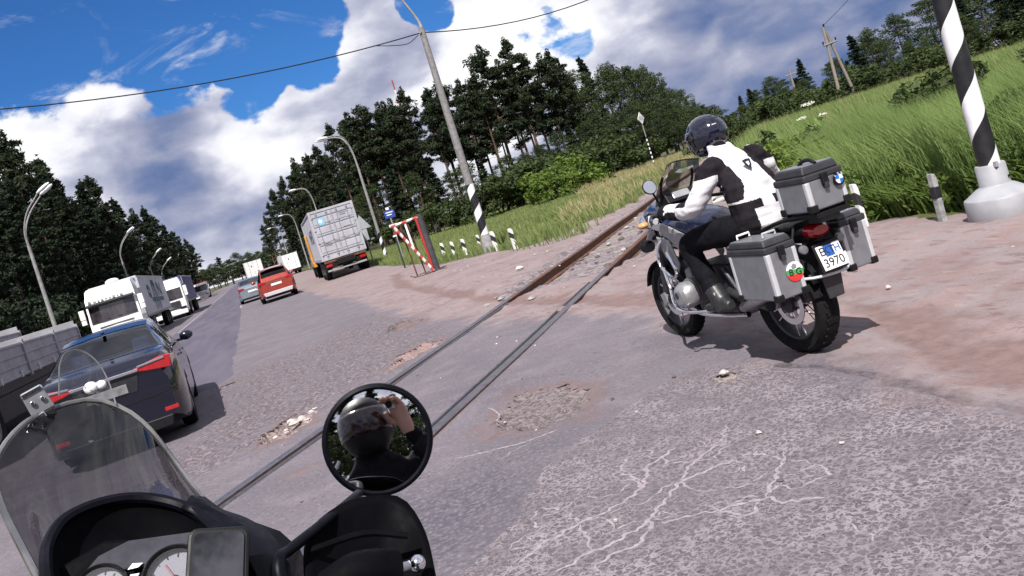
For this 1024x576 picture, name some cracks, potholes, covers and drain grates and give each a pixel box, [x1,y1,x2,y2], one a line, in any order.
pothole [381,317,430,334]
pothole [384,337,449,373]
crack [456,407,881,574]
pothole [248,408,327,450]
pothole [476,379,605,439]
